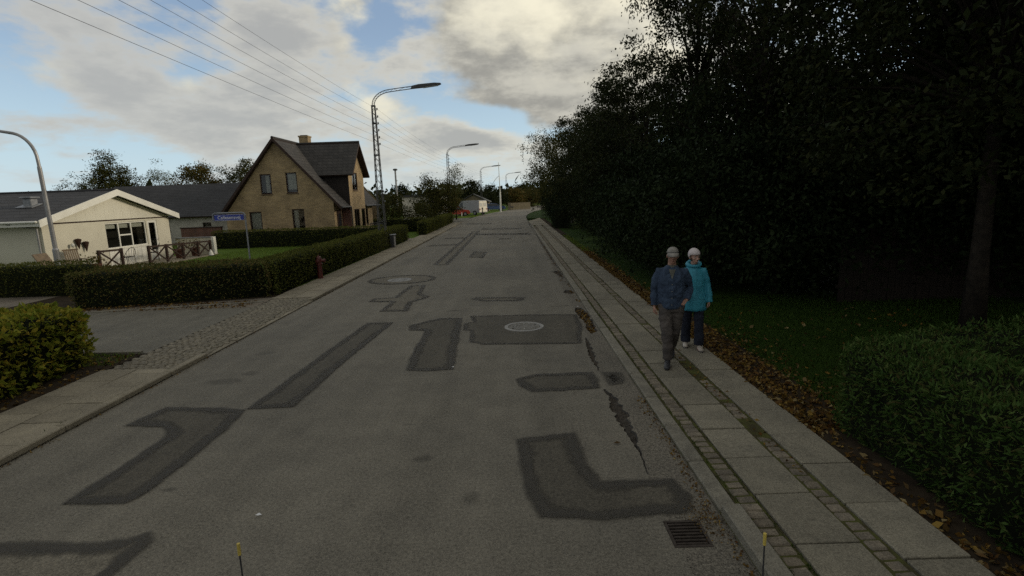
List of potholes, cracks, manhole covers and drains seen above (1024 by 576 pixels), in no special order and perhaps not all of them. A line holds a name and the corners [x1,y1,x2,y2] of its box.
pothole [575,308,598,334]
drain grate [663,520,714,548]
manhole cover [504,322,544,331]
